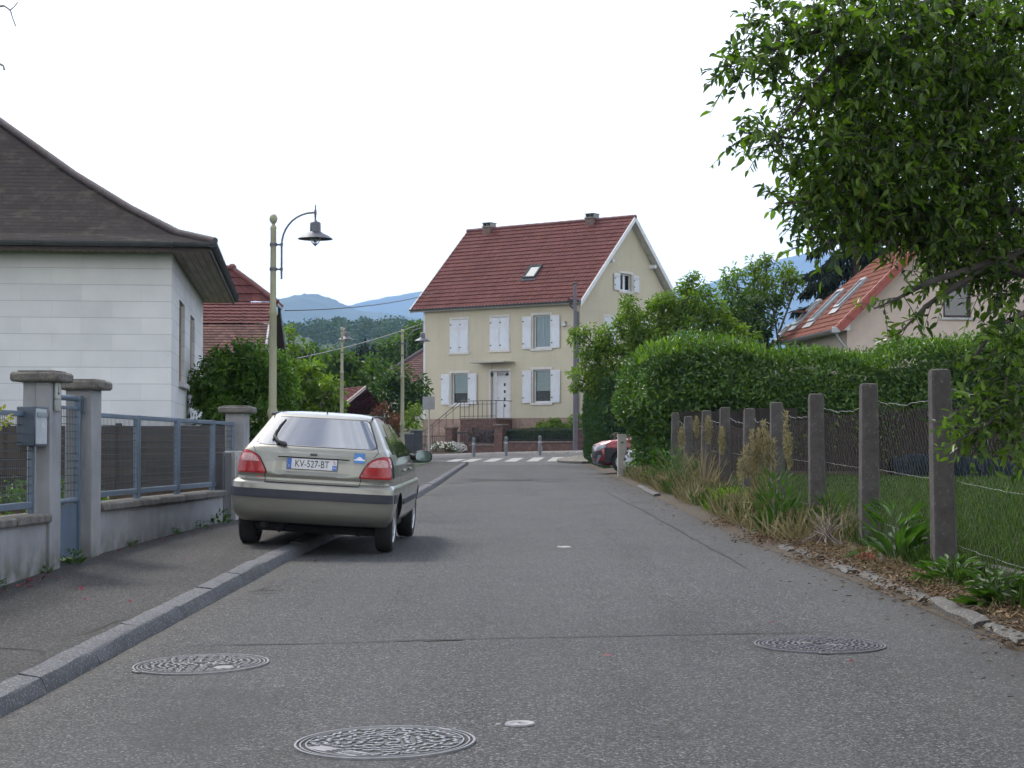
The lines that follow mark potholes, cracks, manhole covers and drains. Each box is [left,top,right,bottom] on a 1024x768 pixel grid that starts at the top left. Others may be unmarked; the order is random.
manhole cover [131,654,269,676]
manhole cover [754,636,886,655]
manhole cover [294,725,476,761]
